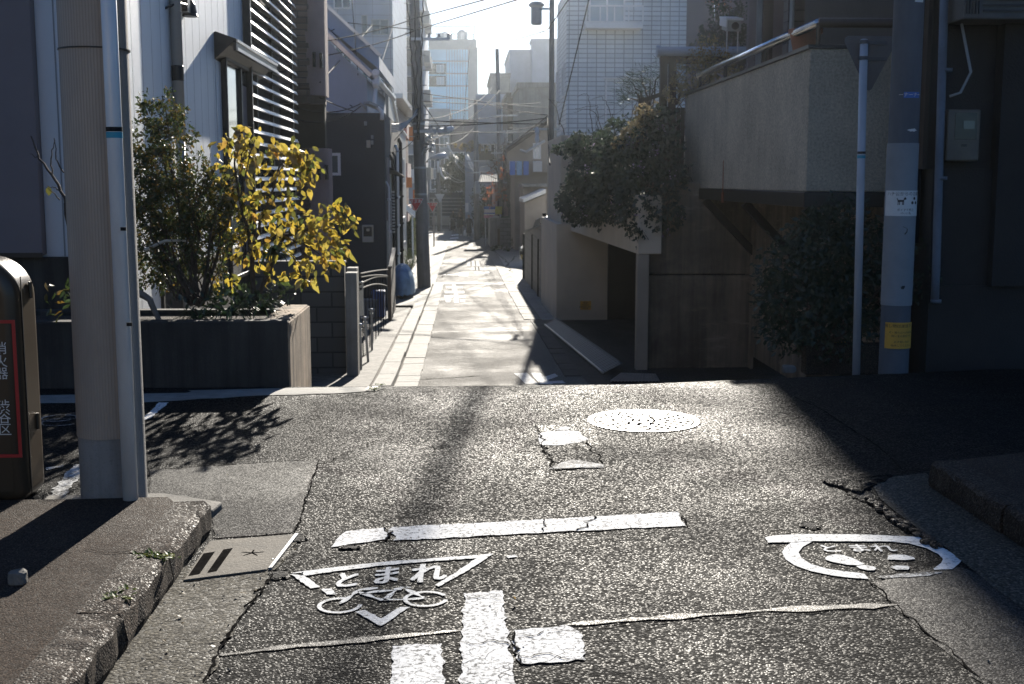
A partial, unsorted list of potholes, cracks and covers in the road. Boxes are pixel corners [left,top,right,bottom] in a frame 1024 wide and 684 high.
crack [203,573,273,682]
crack [535,425,603,470]
manhole cover [588,410,700,432]
crack [868,580,992,684]
